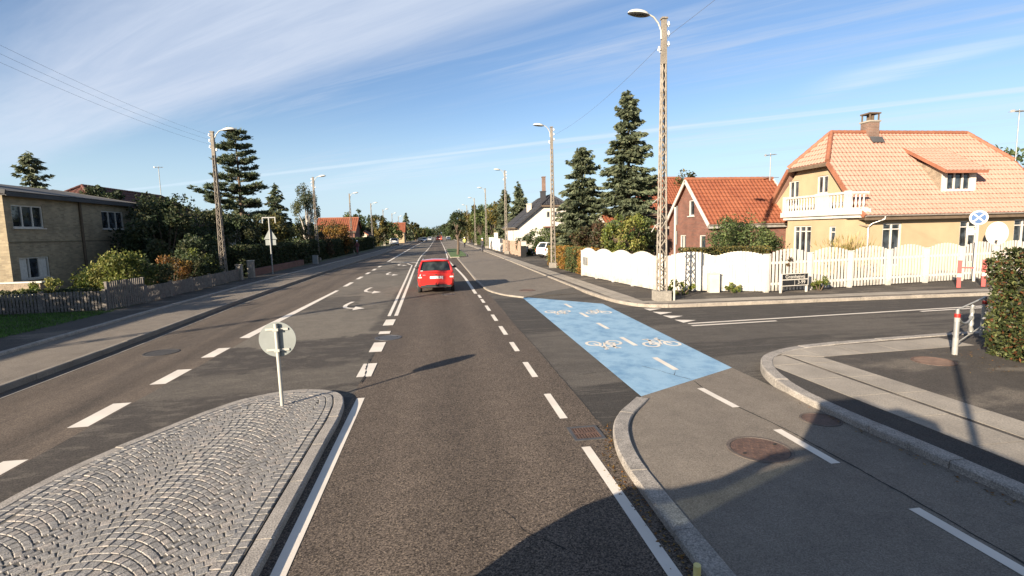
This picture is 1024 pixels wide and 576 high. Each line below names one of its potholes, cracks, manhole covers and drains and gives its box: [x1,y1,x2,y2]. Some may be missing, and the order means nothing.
manhole cover [142,349,180,357]
crack [502,509,584,556]
manhole cover [799,412,843,427]
drain grate [566,425,606,442]
manhole cover [726,436,795,463]
manhole cover [910,356,958,366]
